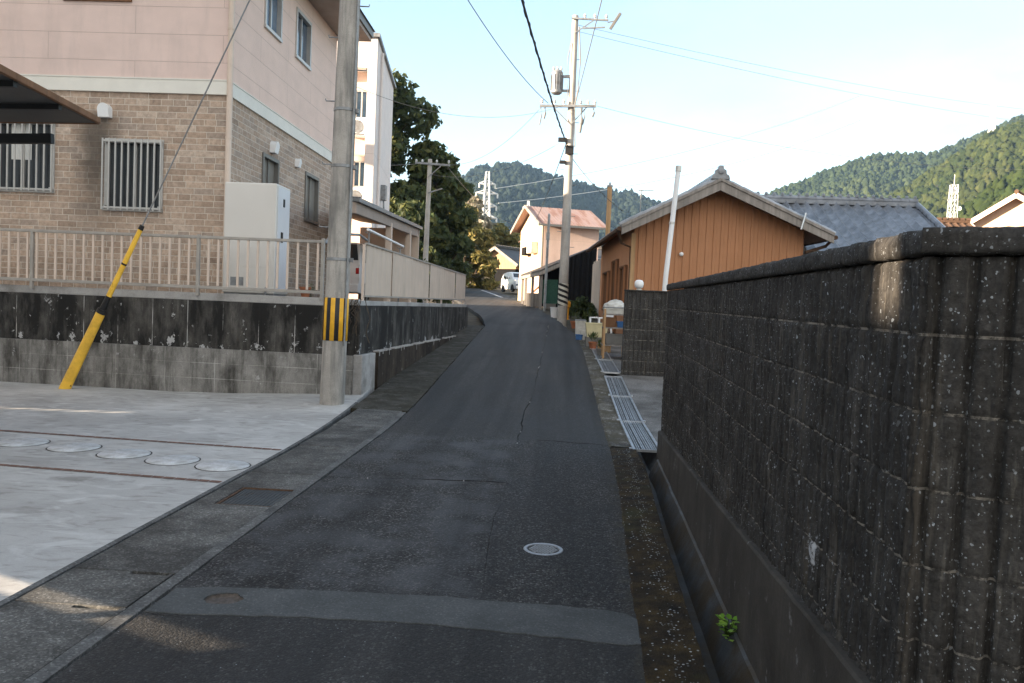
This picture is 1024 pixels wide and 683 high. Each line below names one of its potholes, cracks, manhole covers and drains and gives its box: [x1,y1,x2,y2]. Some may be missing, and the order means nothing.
drain grate [604,376,657,453]
drain grate [590,347,621,374]
manhole cover [523,543,563,556]
